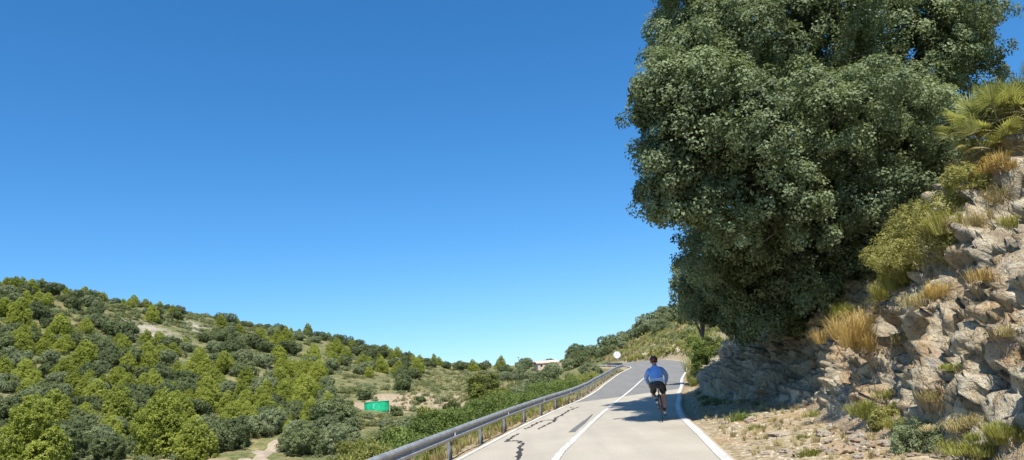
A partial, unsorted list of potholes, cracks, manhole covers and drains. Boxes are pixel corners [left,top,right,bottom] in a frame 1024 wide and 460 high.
crack [504,407,578,460]
